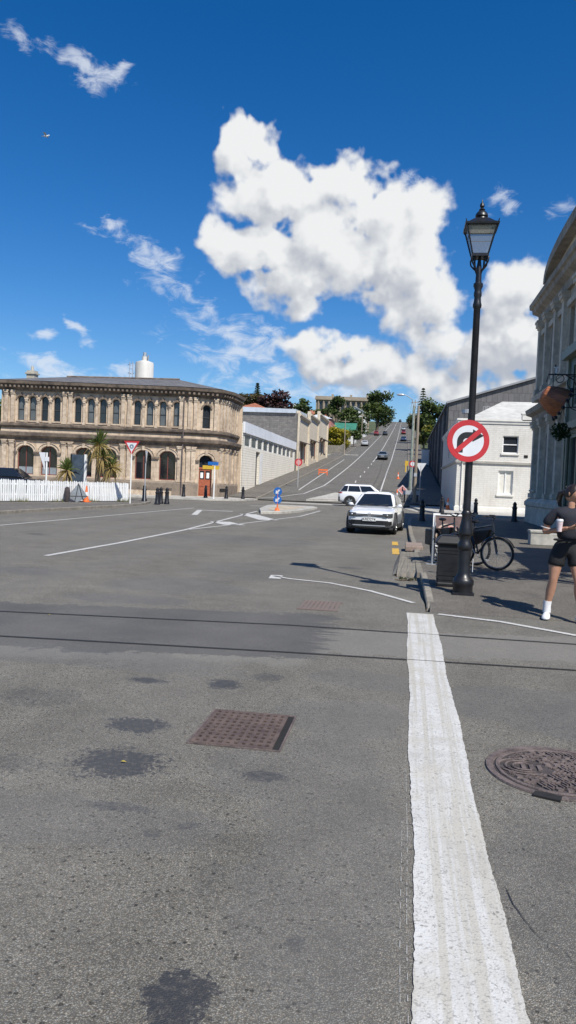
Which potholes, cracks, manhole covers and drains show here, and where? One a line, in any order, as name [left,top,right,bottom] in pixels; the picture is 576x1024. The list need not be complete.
drain grate [297,600,343,612]
crack [506,888,575,963]
manhole cover [186,709,297,752]
manhole cover [485,746,576,802]
